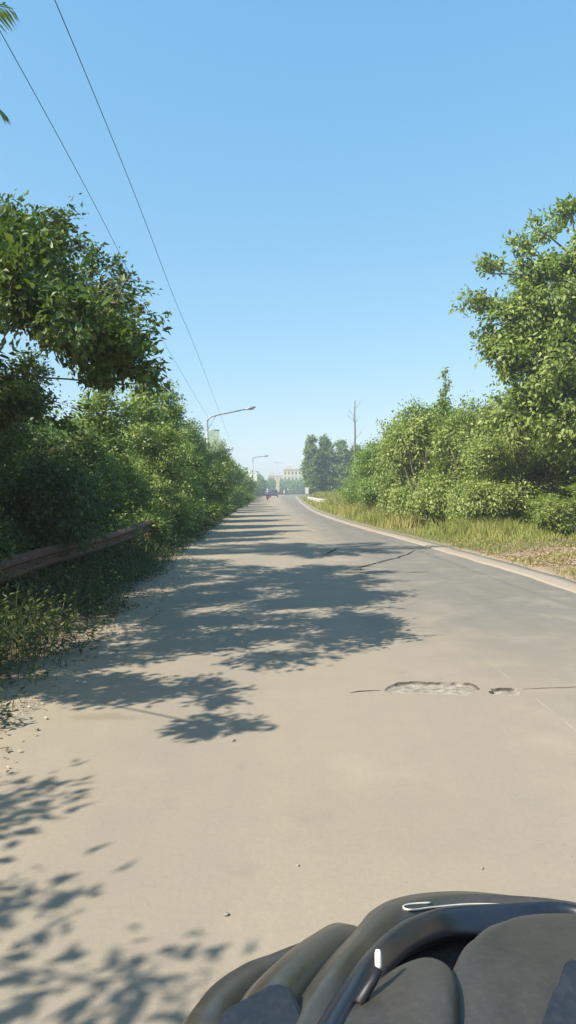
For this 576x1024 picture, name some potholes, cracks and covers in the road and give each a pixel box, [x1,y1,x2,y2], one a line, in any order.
pothole [385,681,480,696]
pothole [489,688,521,696]
crack [357,547,420,575]
